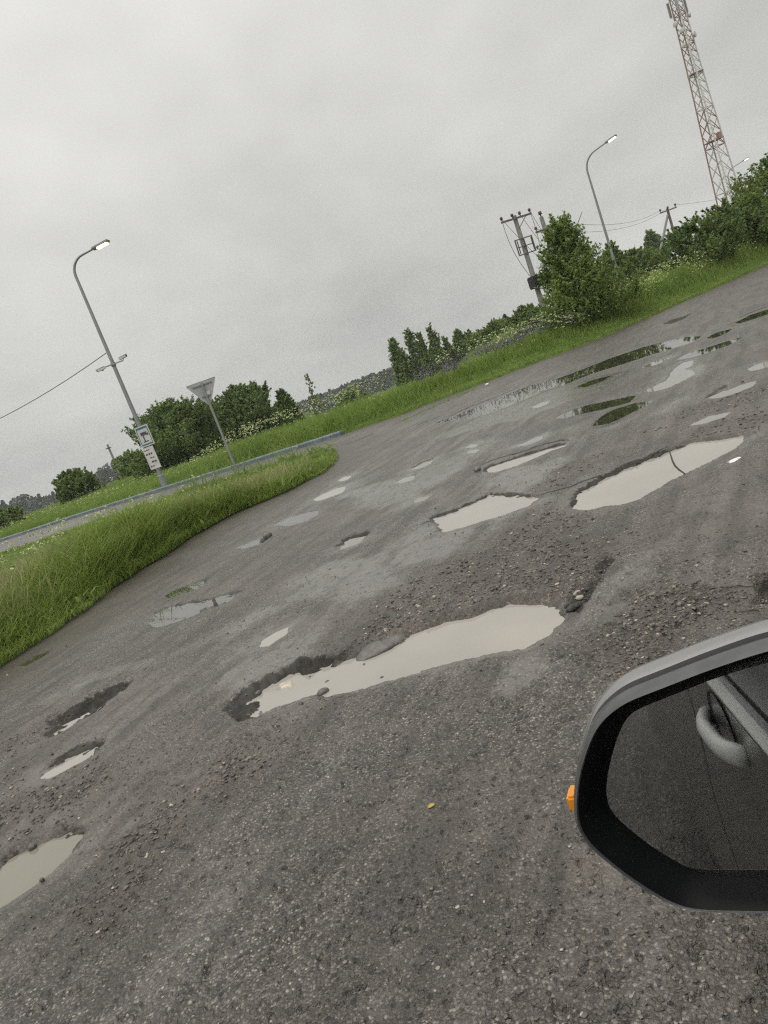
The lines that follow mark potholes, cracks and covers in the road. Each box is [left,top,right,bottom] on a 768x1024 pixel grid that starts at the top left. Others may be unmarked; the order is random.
pothole [431,332,713,425]
pothole [129,588,250,634]
pothole [478,438,581,475]
pothole [416,487,567,544]
pothole [14,676,137,748]
pothole [196,585,610,741]
pothole [0,742,113,799]
pothole [61,733,108,752]
pothole [578,396,666,432]
pothole [322,532,378,557]
pothole [548,427,768,521]
pothole [0,820,96,922]
